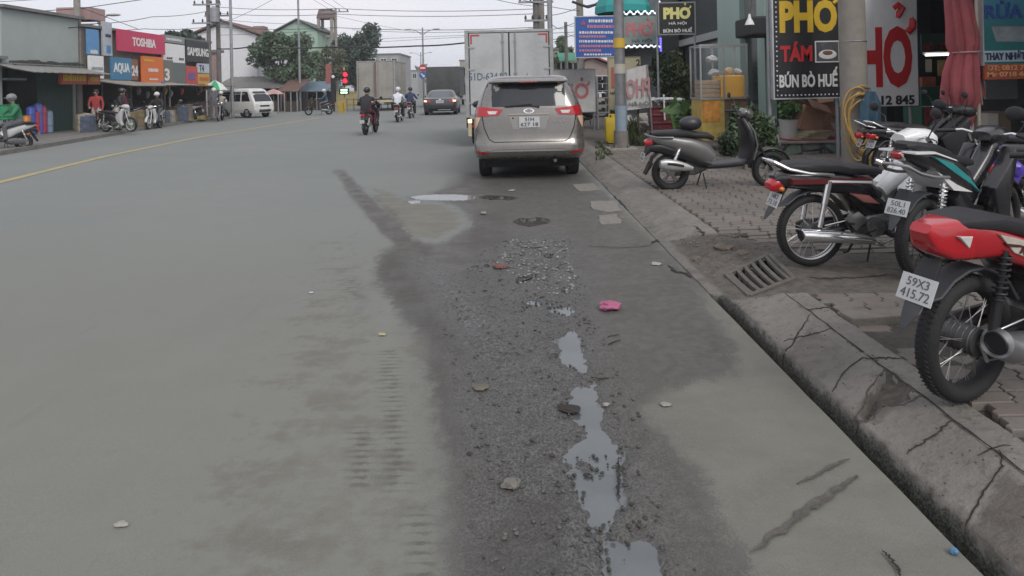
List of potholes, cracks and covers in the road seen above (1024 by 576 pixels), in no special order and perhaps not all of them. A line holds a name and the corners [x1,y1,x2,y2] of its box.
pothole [513,217,550,227]
crack [781,315,809,369]
crack [882,550,901,576]
pothole [520,239,565,248]
